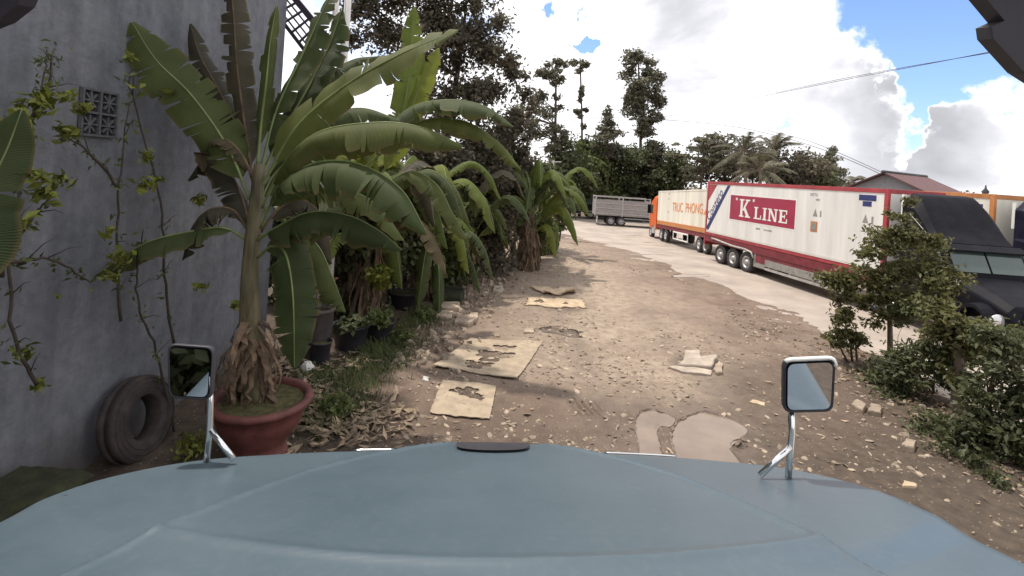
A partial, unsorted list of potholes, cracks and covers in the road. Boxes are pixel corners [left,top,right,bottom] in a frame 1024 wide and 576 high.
pothole [670,410,749,463]
pothole [634,409,676,457]
pothole [538,326,586,338]
